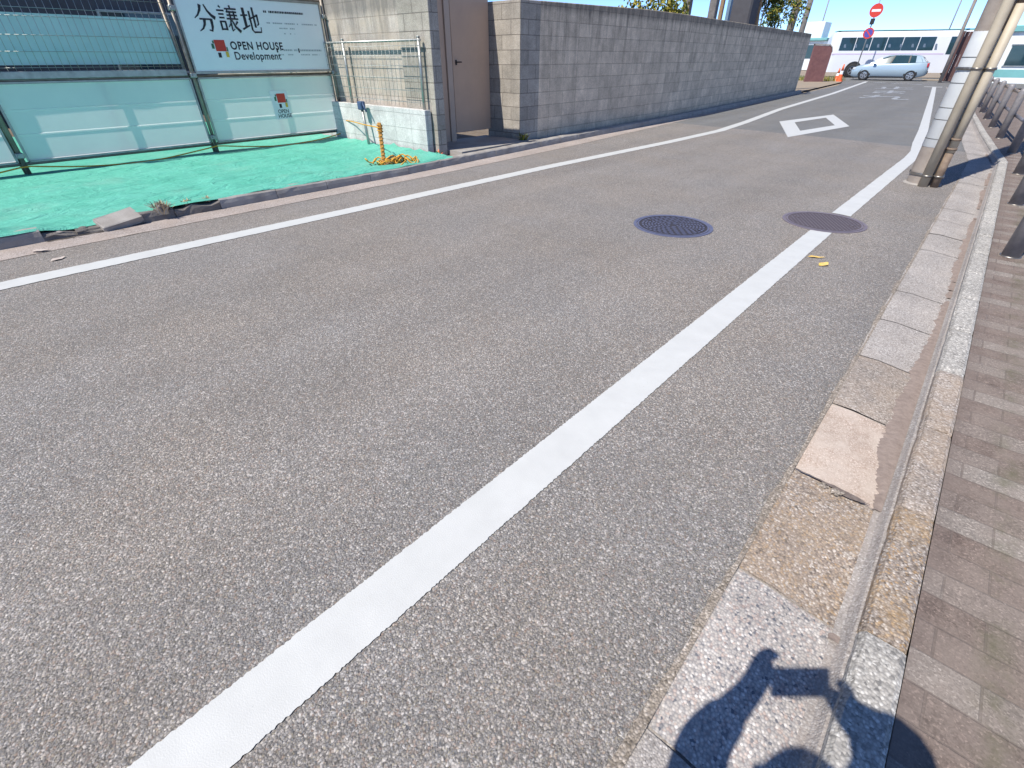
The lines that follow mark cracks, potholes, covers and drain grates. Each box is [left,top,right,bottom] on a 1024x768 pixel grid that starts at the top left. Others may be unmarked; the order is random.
manhole cover [634,215,713,238]
manhole cover [782,211,868,233]
